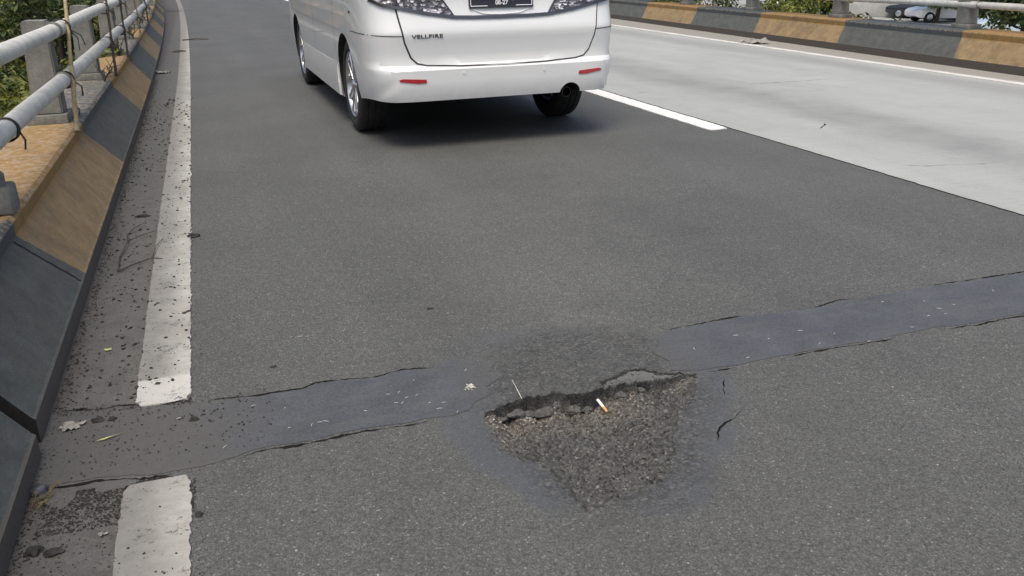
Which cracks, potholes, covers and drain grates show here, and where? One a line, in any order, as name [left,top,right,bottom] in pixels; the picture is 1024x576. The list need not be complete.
pothole [483,368,699,512]
crack [707,367,742,443]
